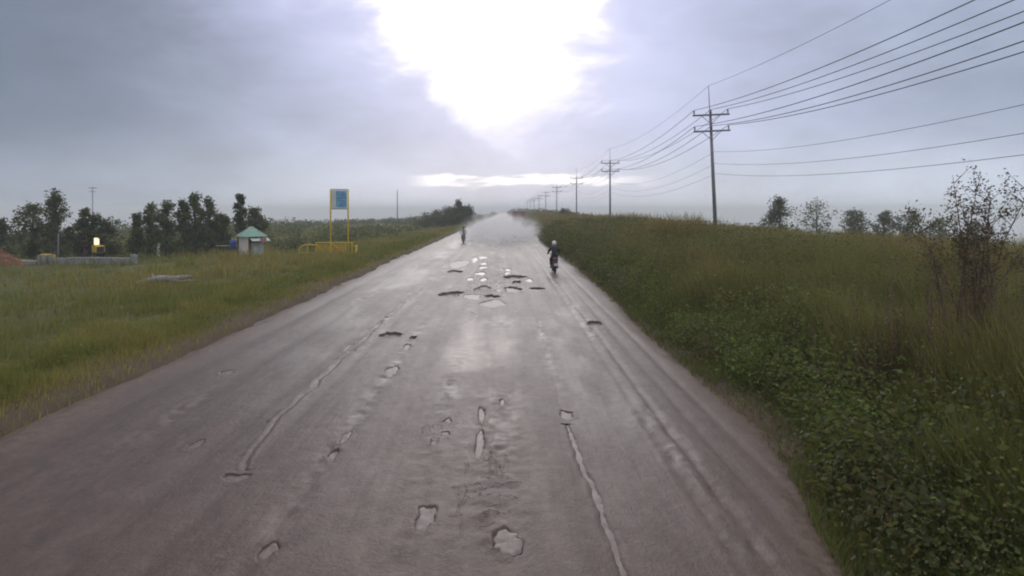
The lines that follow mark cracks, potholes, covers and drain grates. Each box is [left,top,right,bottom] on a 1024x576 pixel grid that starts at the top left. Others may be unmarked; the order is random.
pothole [213,368,240,378]
crack [561,424,640,576]
pothole [471,404,494,427]
pothole [378,364,405,379]
pothole [175,436,215,454]
pothole [373,331,408,339]
pothole [211,469,263,486]
pothole [473,298,511,309]
pothole [476,520,536,564]
